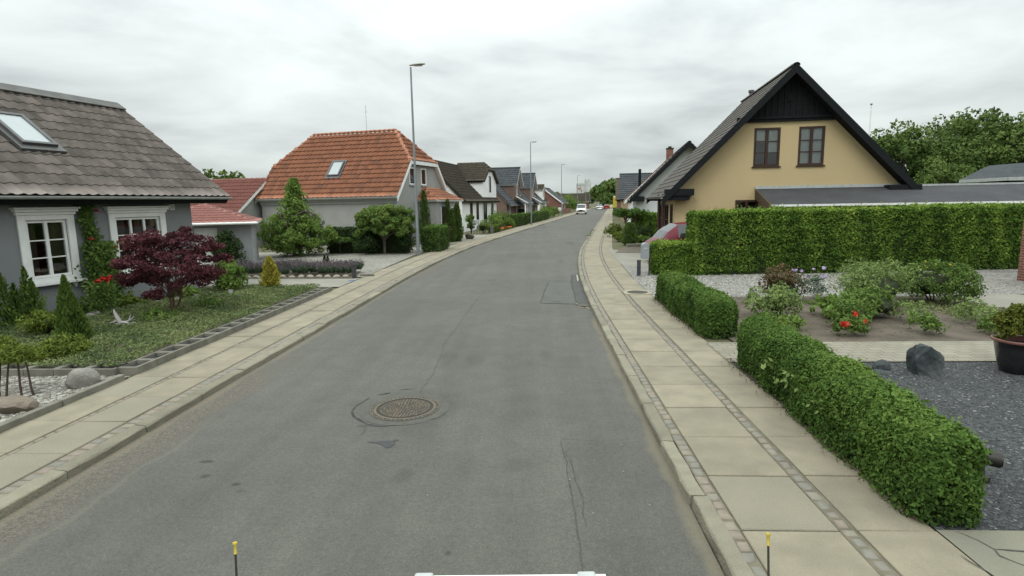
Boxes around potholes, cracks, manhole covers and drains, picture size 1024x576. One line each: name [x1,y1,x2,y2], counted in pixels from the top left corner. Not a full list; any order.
manhole cover [360,394,449,425]
crack [559,438,601,568]
